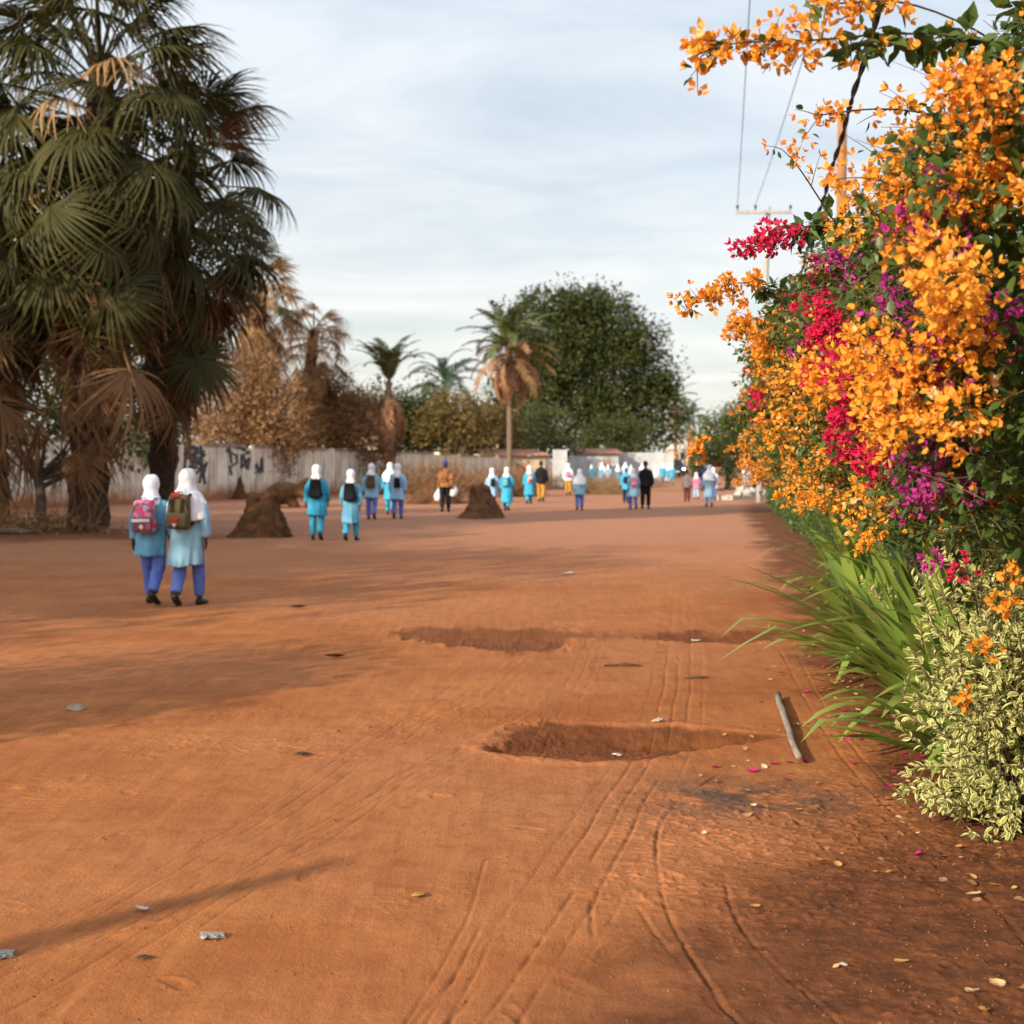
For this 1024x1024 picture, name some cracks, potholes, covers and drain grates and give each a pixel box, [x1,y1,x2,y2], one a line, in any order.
pothole [472,719,800,762]
pothole [390,624,601,654]
pothole [635,626,796,645]
